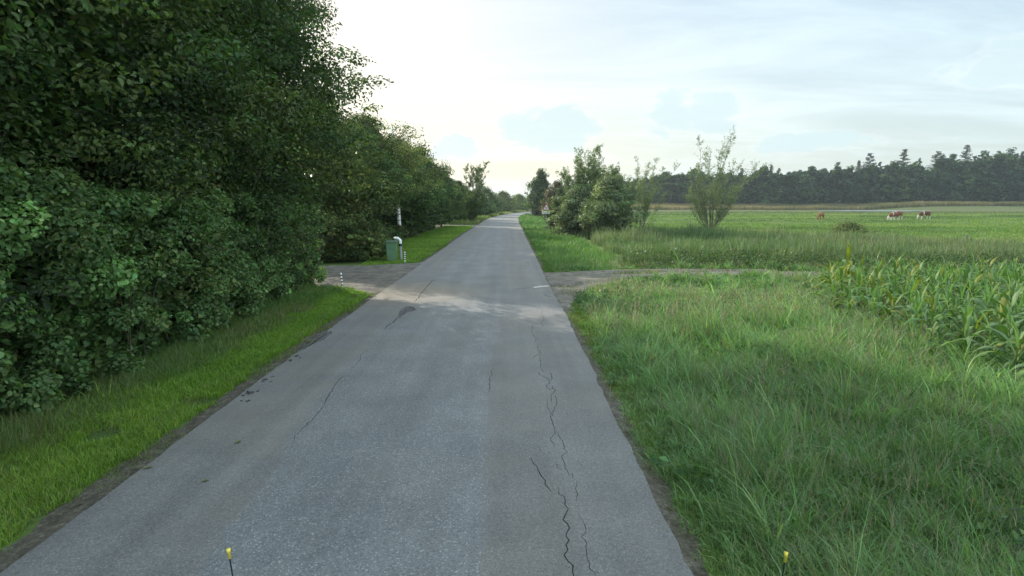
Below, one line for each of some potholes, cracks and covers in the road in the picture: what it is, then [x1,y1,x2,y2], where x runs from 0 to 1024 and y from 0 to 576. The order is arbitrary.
crack [519,287,596,576]
